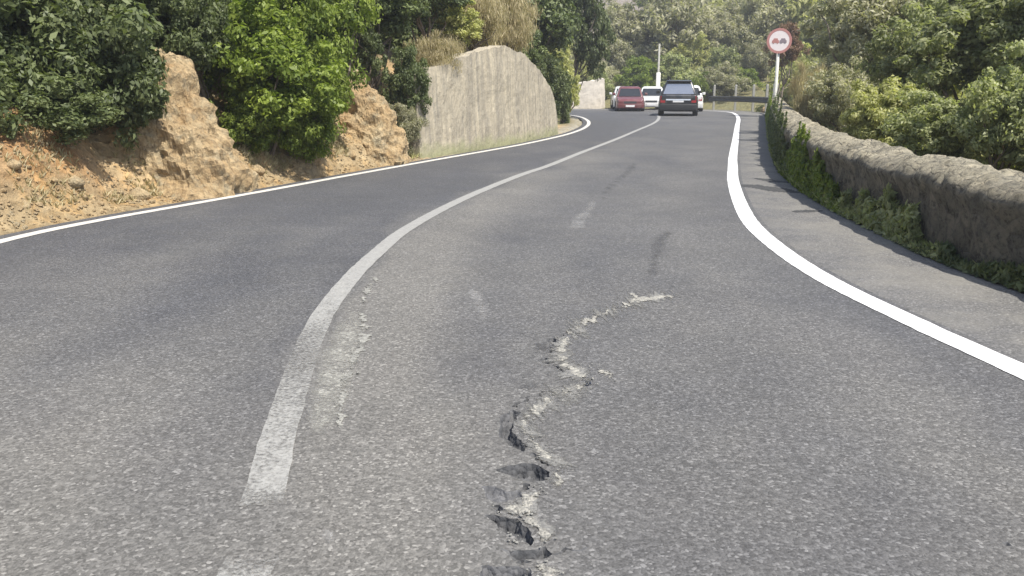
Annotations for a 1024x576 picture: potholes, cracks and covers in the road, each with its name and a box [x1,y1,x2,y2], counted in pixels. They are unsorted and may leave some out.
crack [491,290,681,576]
crack [335,277,382,426]
